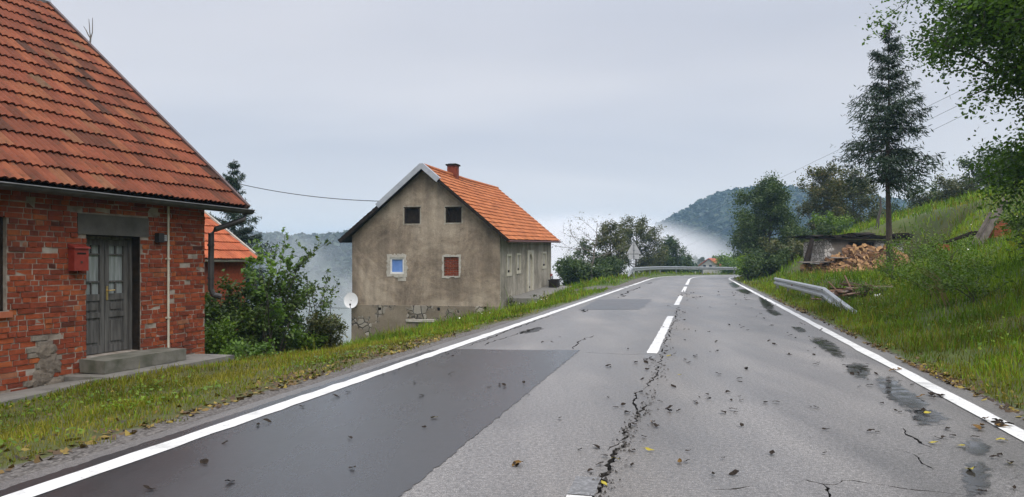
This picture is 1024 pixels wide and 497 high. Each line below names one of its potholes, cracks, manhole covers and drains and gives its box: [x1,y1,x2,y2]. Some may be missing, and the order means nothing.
crack [592,308,678,497]
crack [467,316,549,347]
